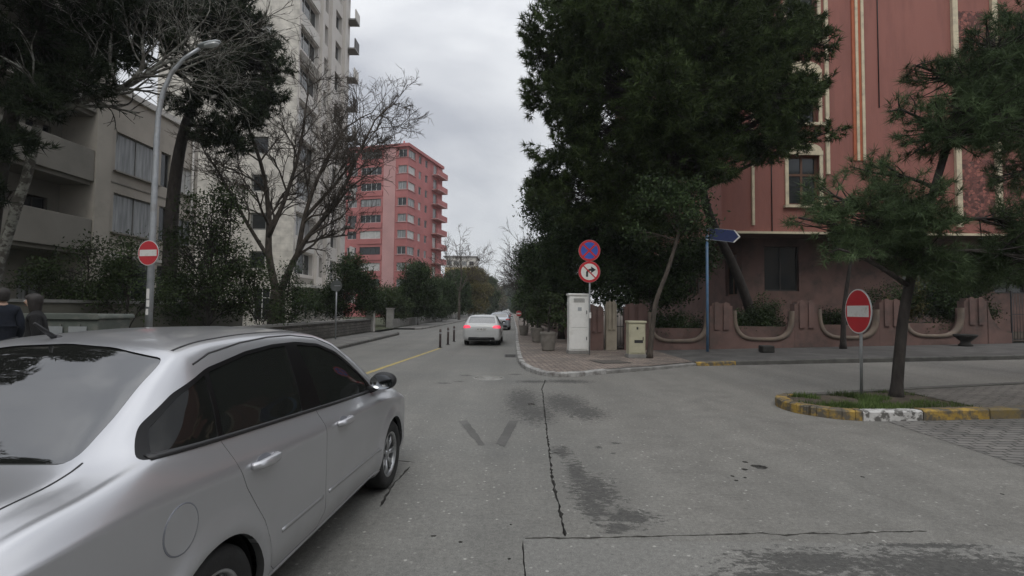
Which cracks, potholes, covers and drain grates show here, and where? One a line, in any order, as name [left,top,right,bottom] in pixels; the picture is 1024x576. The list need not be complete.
crack [380,460,410,506]
crack [525,381,925,539]
